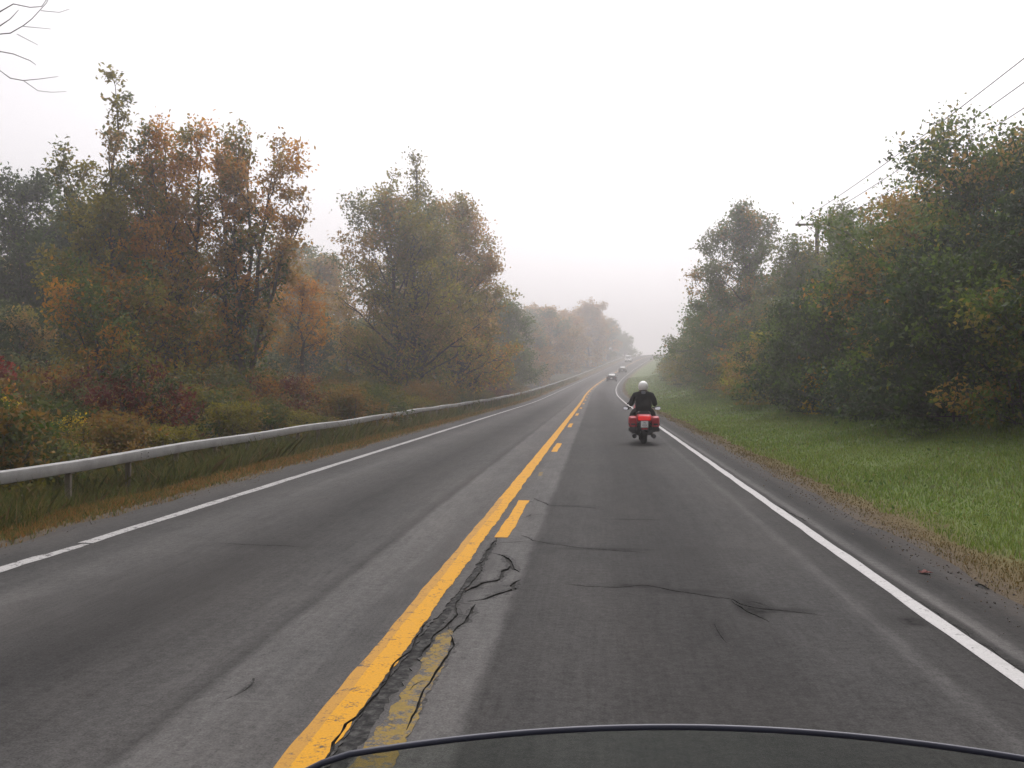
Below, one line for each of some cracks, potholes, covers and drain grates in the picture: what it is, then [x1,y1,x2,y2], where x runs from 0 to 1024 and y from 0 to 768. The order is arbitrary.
crack [569,584,824,641]
crack [325,536,632,768]
